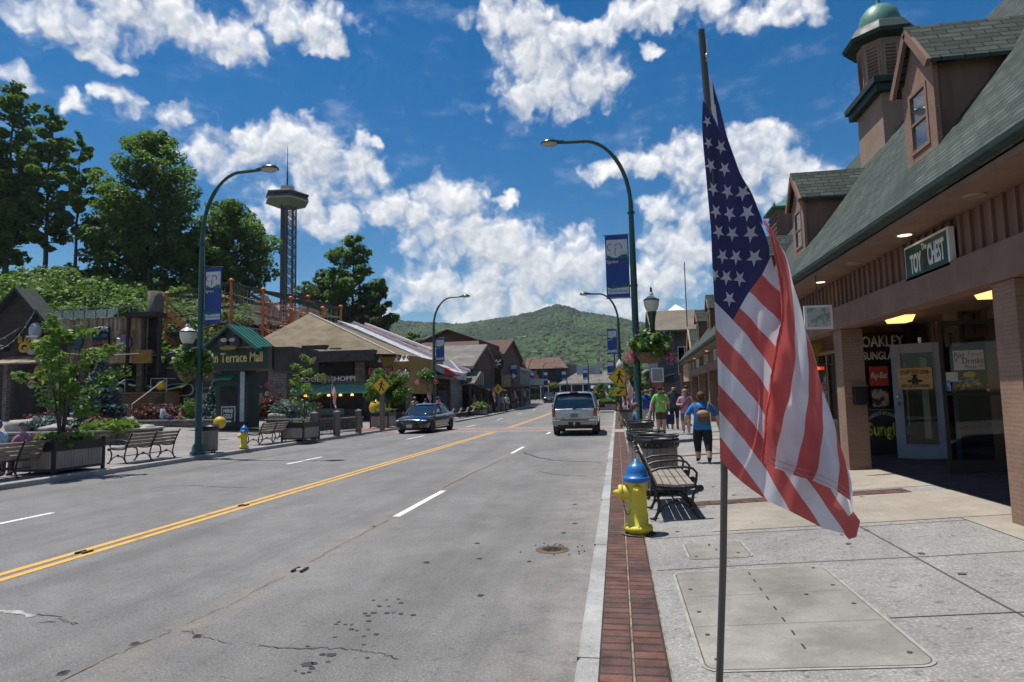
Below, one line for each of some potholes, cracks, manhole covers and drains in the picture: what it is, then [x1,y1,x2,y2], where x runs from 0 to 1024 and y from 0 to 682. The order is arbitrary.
manhole cover [520,543,585,555]
crack [31,613,77,626]
crack [262,645,397,659]
